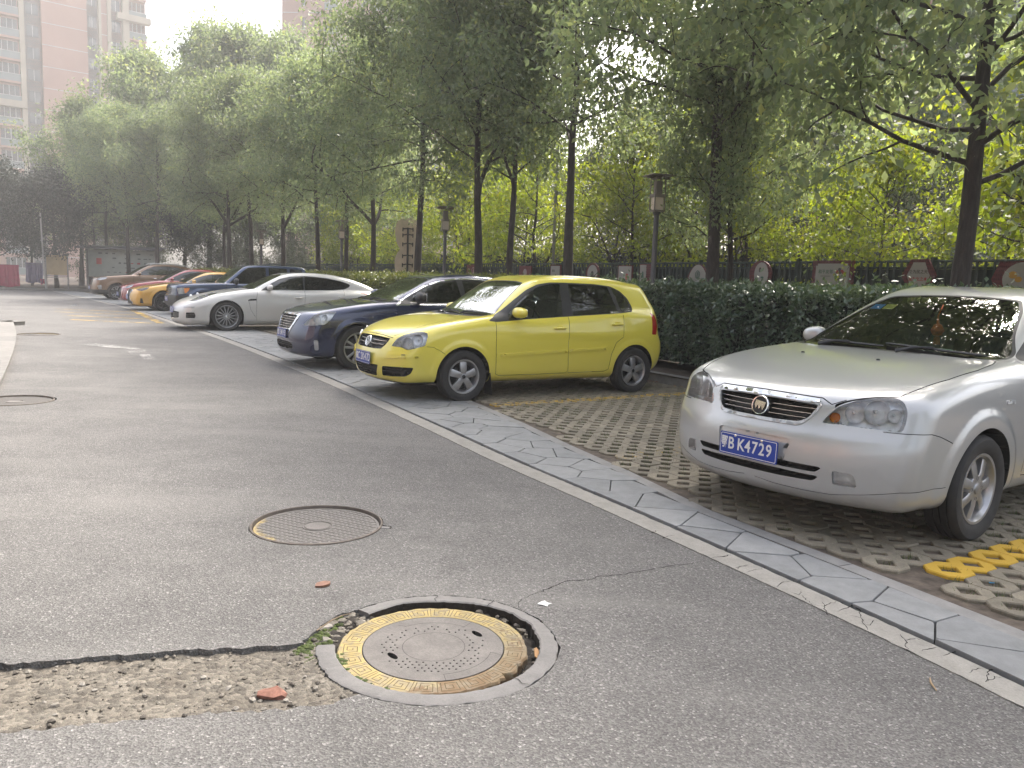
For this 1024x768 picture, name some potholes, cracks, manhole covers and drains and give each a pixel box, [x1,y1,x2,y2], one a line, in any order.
manhole cover [0,395,55,406]
manhole cover [315,594,558,706]
manhole cover [249,505,391,546]
crack [518,555,756,607]
pothole [0,612,369,733]
